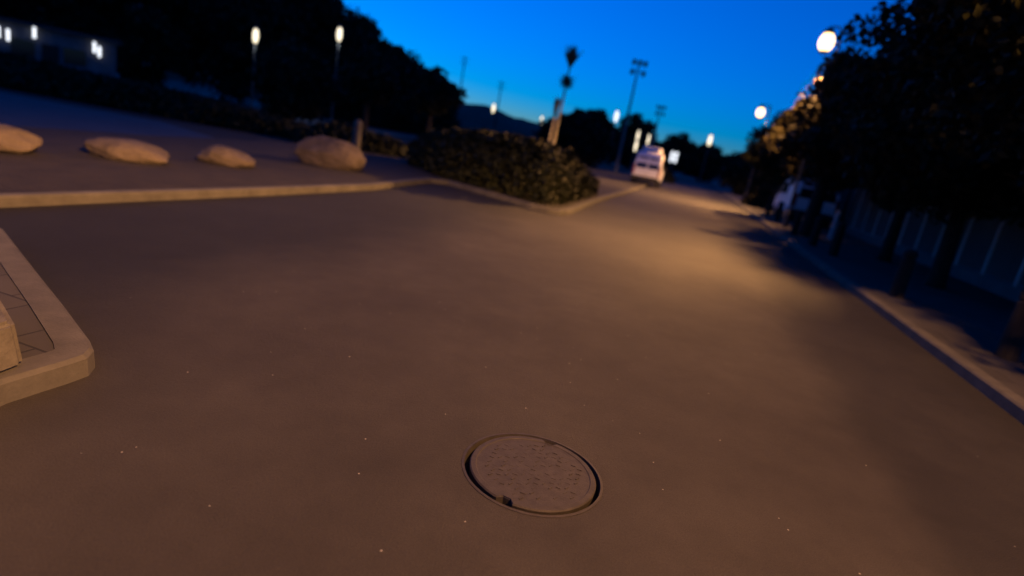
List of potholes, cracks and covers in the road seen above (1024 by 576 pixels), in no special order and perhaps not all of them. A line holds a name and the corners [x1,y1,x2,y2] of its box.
manhole cover [461,433,603,518]
